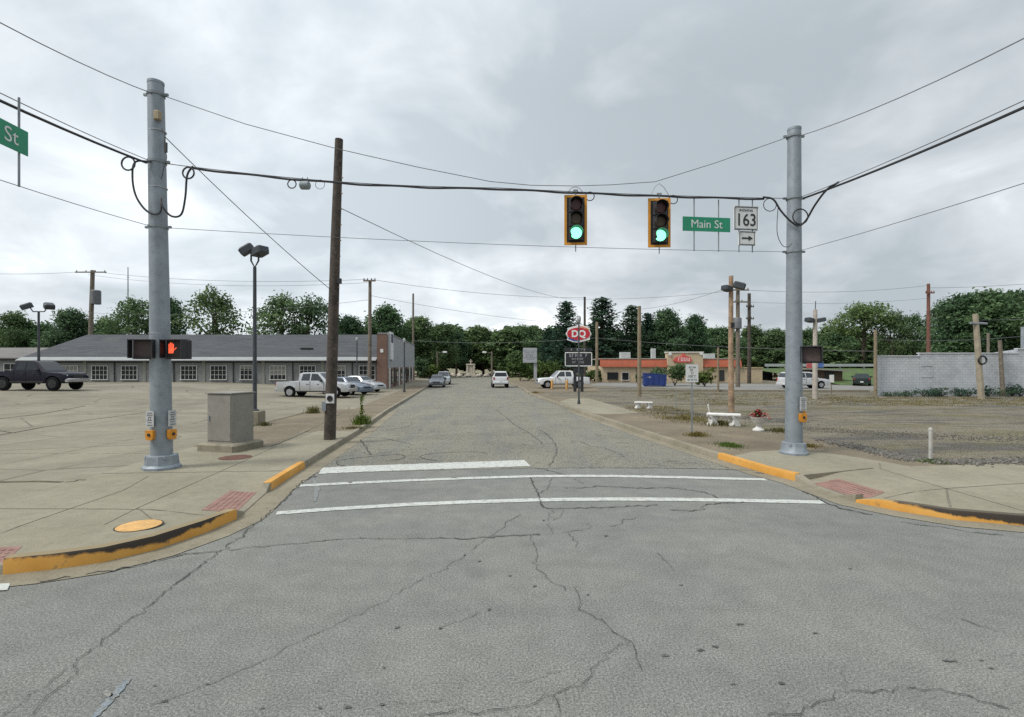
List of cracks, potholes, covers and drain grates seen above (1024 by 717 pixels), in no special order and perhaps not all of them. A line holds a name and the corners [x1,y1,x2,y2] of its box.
crack [1,430,735,717]
manhole cover [113,519,164,532]
crack [768,663,1009,717]
